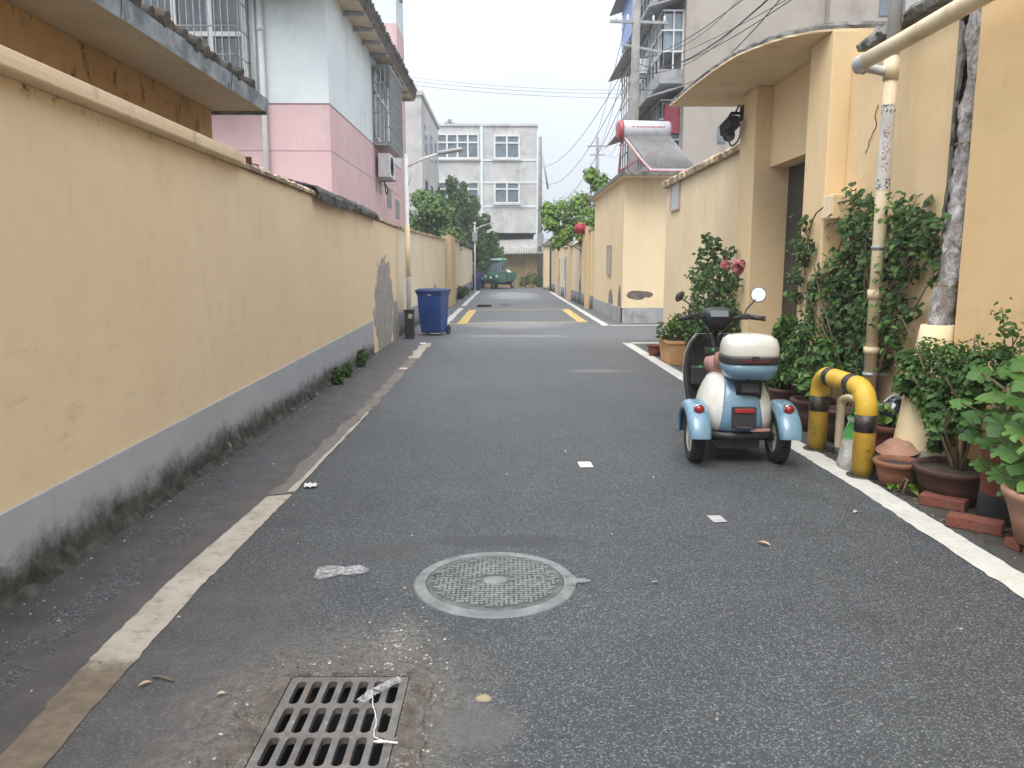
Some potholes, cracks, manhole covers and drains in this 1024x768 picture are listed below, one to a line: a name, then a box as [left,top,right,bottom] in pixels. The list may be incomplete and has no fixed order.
drain grate [206,671,434,768]
manhole cover [414,552,591,619]
